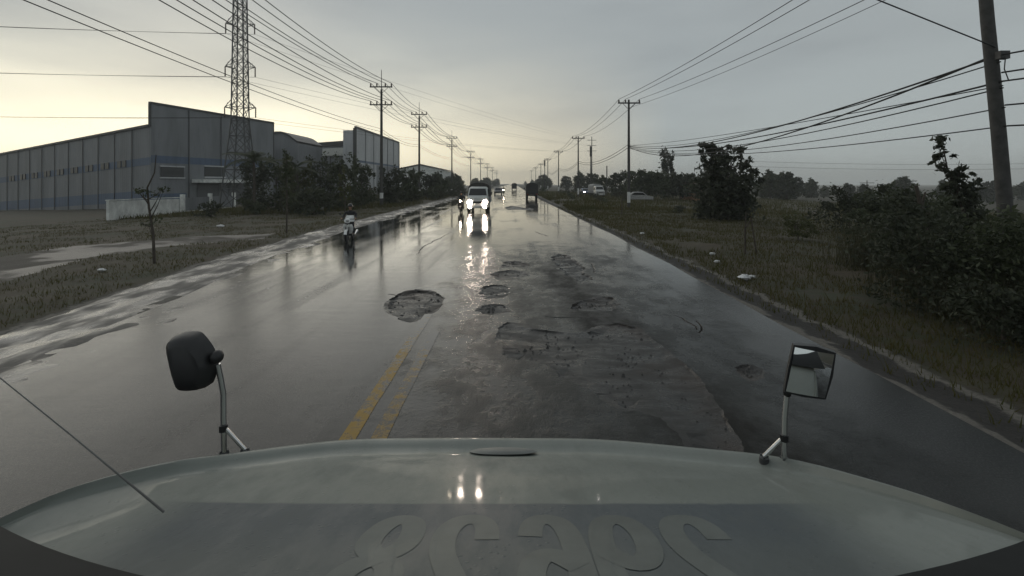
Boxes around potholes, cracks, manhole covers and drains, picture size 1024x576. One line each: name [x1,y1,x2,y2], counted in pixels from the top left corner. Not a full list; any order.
pothole [475,304,512,315]
pothole [550,254,593,281]
pothole [476,285,510,299]
pothole [735,364,765,382]
pothole [495,322,744,452]
pothole [490,270,531,280]
pothole [571,297,621,312]
crack [675,315,703,333]
pothole [383,289,445,323]
